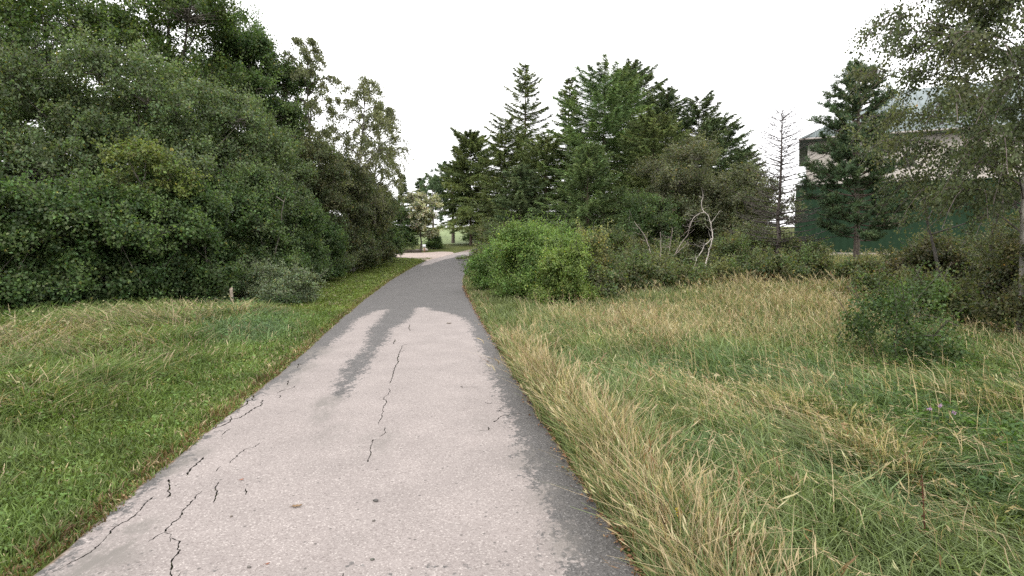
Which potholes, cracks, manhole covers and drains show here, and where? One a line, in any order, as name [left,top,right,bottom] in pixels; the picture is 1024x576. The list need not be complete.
crack [49,364,302,576]
crack [367,325,410,462]
